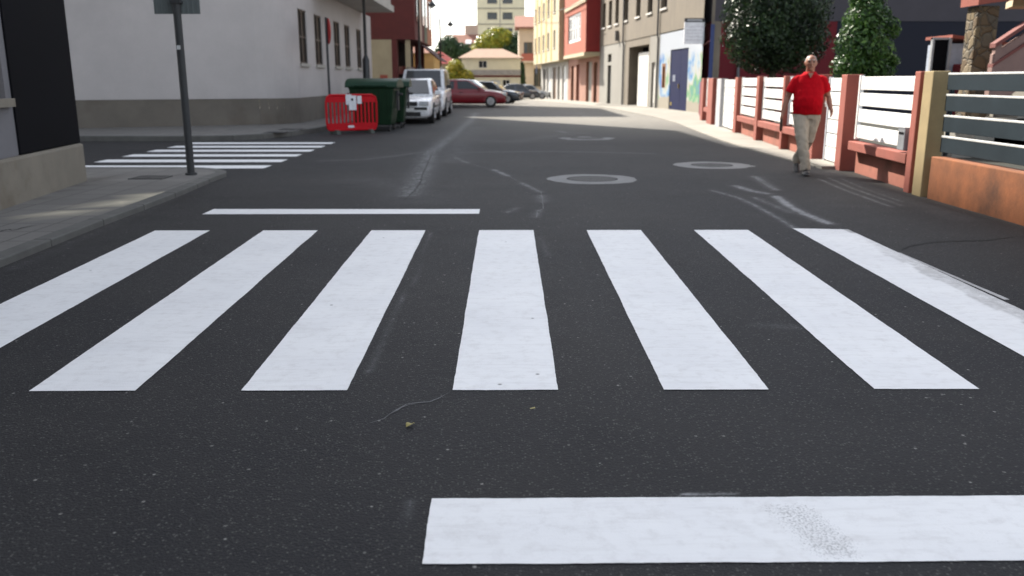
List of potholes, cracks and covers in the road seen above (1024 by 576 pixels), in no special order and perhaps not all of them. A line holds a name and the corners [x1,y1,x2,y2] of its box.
crack [901,236,1021,251]
crack [374,392,449,422]
manhole cover [547,174,637,184]
